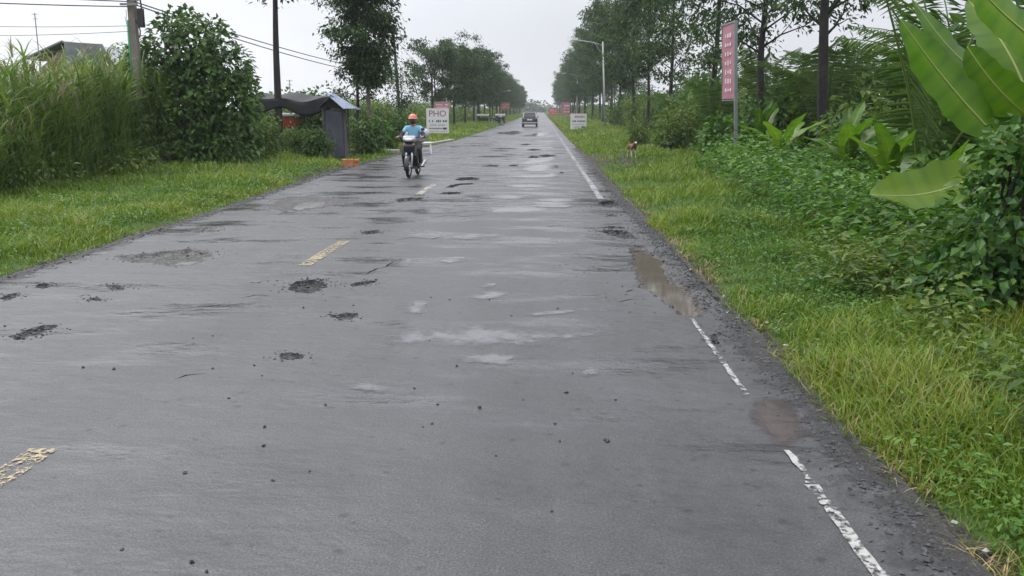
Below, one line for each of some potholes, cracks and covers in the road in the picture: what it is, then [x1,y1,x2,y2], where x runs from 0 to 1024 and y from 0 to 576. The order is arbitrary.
pothole [320,311,363,321]
pothole [2,322,71,342]
pothole [90,247,237,267]
pothole [270,277,341,296]
pothole [0,293,28,301]
pothole [588,228,643,240]
